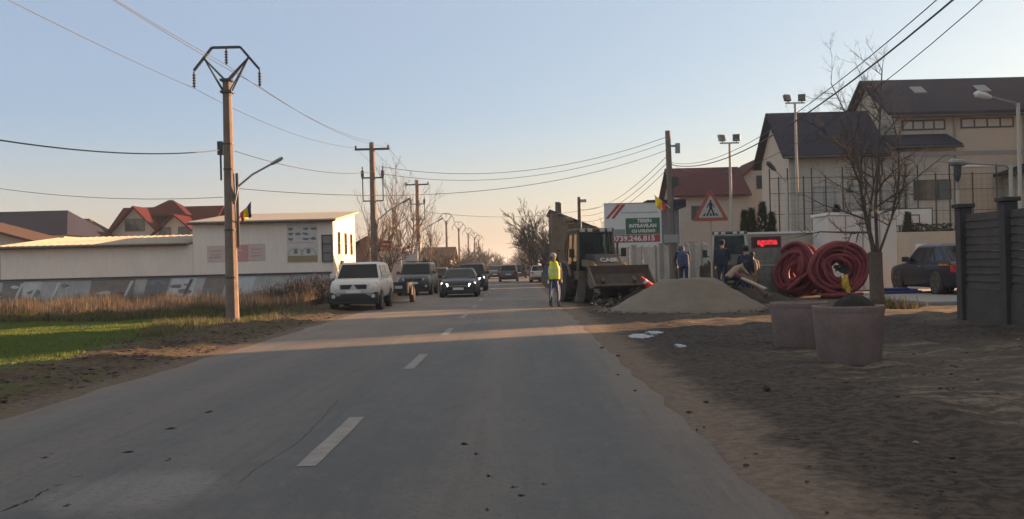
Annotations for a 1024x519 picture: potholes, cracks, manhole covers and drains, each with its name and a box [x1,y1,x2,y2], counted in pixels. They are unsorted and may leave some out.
crack [1,453,80,512]
